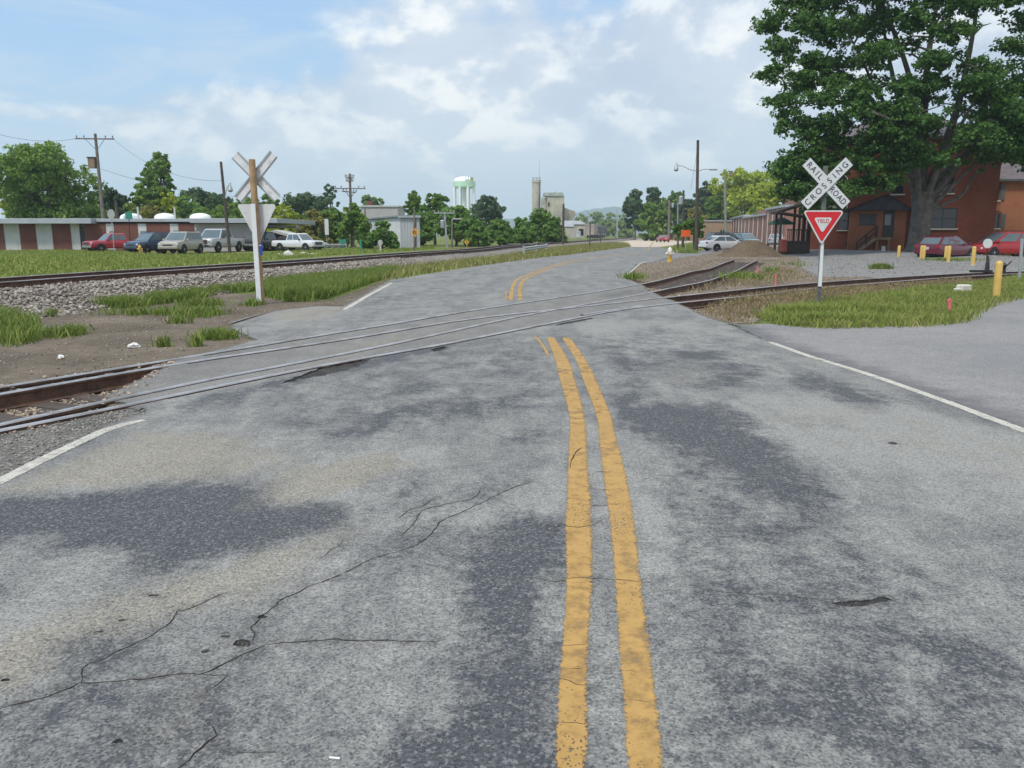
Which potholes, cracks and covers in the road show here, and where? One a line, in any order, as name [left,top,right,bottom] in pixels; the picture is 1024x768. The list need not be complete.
crack [179,725,277,768]
pothole [233,639,251,647]
pothole [831,596,891,607]
pothole [283,359,369,383]
crack [0,482,530,709]
